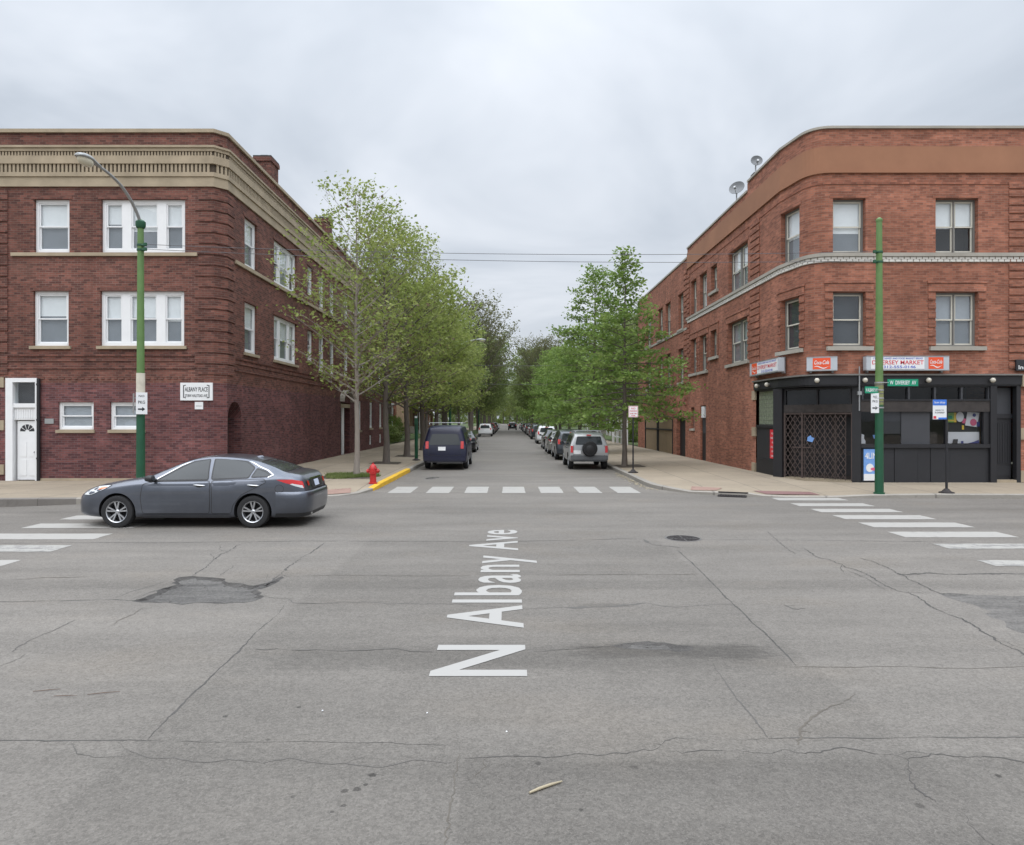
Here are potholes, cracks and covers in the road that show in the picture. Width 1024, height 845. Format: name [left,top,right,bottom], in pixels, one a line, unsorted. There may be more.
crack [71,742,458,767]
pothole [134,576,284,605]
crack [444,694,1023,845]
crack [767,531,1024,655]
